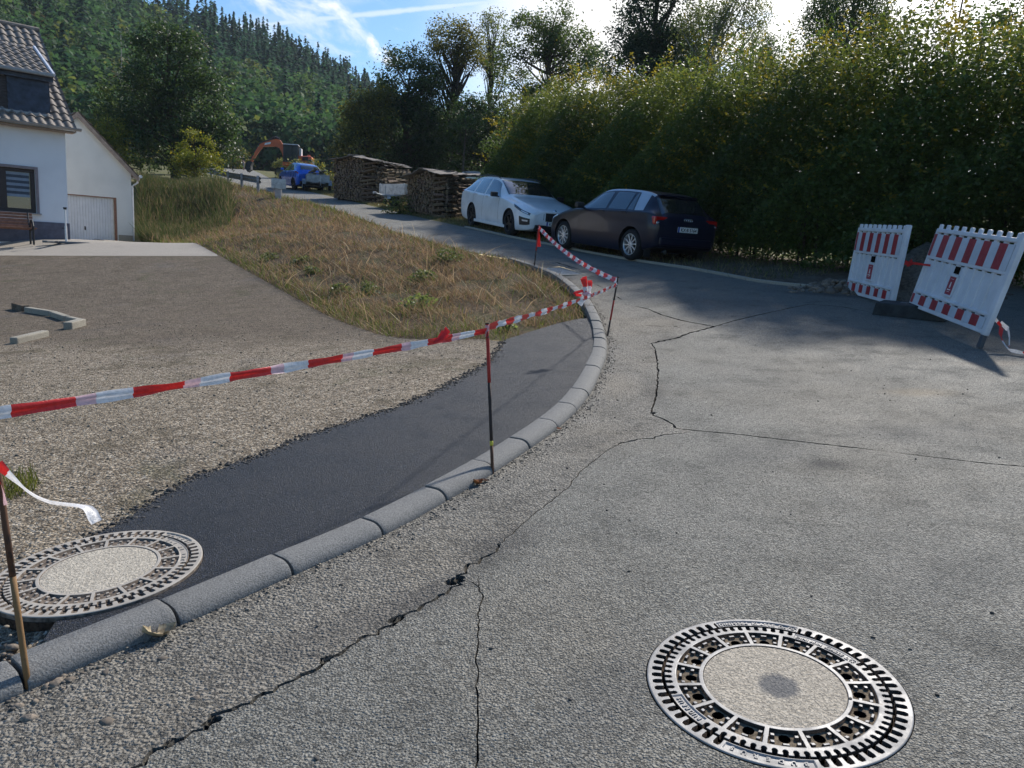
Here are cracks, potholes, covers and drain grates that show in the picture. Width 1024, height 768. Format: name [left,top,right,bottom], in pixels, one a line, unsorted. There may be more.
crack [461,573,484,768]
manhole cover [646,619,915,768]
crack [636,304,1024,467]
manhole cover [0,530,204,632]
